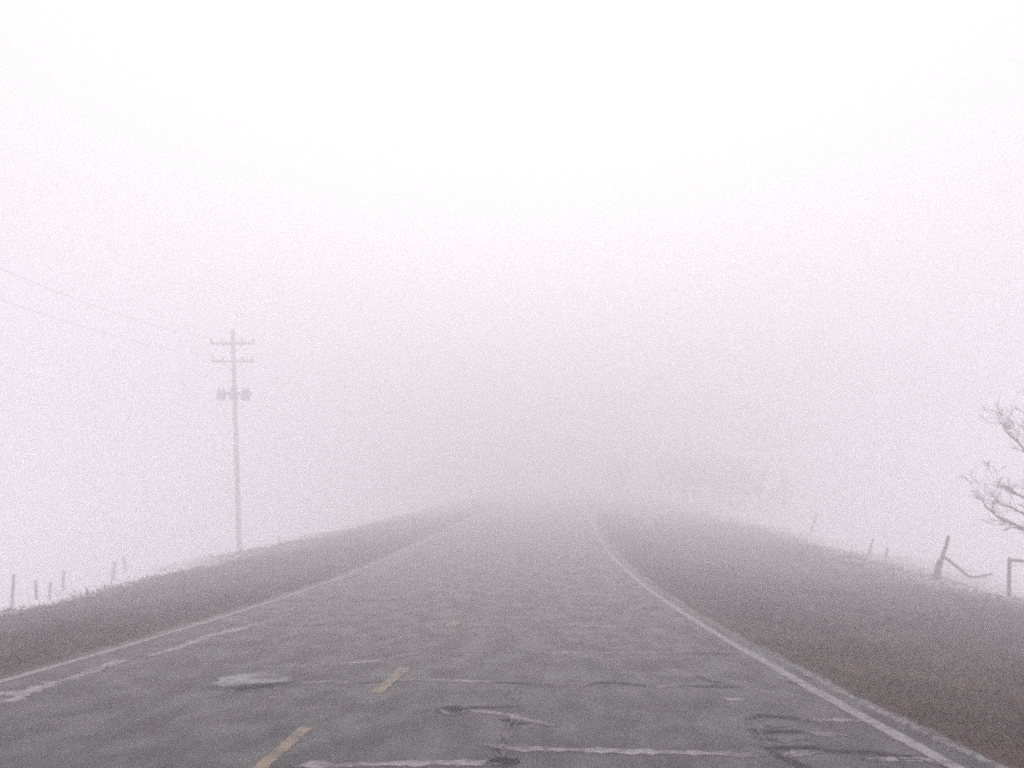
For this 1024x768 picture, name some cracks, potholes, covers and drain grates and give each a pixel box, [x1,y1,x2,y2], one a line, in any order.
crack [260,637,949,768]
